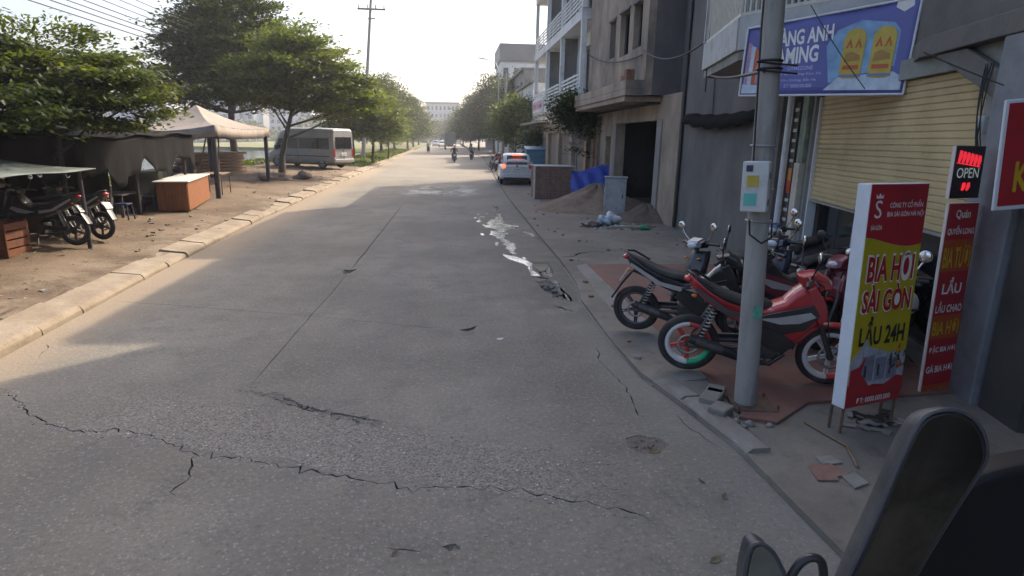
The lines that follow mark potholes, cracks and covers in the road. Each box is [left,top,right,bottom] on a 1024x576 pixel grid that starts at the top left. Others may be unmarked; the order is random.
pothole [537,280,563,300]
pothole [533,263,553,277]
crack [7,393,639,515]
